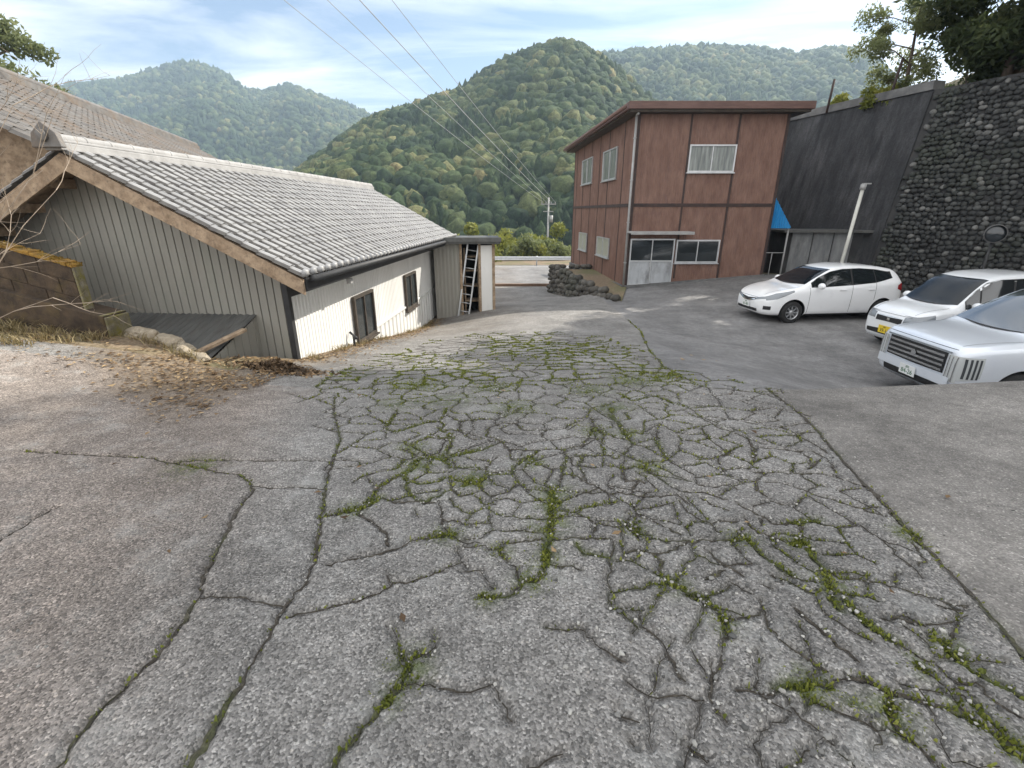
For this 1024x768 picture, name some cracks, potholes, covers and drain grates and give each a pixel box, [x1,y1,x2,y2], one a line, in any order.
crack [291,320,1024,768]
crack [0,507,58,542]
crack [28,398,464,768]
